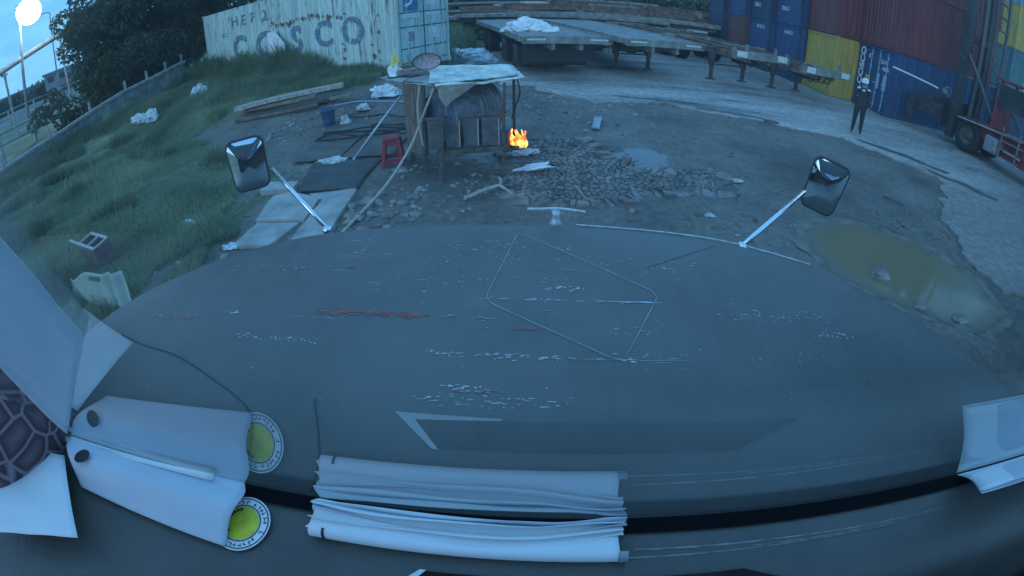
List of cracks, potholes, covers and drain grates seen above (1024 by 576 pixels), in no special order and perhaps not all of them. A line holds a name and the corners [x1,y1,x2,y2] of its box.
pothole [792,214,1016,339]
